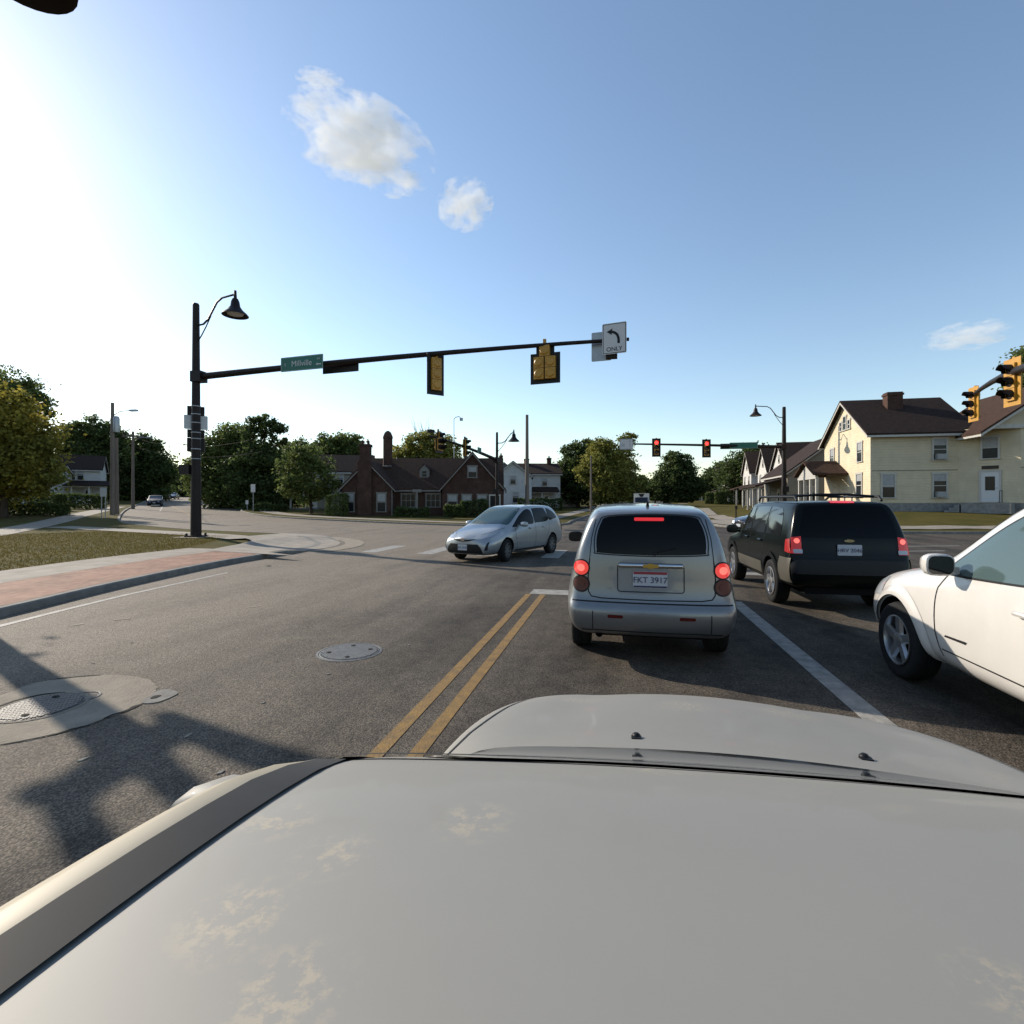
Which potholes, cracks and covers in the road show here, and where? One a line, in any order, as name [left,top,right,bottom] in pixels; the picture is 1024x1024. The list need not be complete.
utility cover [77,691,102,700]
manhole cover [0,692,90,724]
manhole cover [316,643,382,662]
